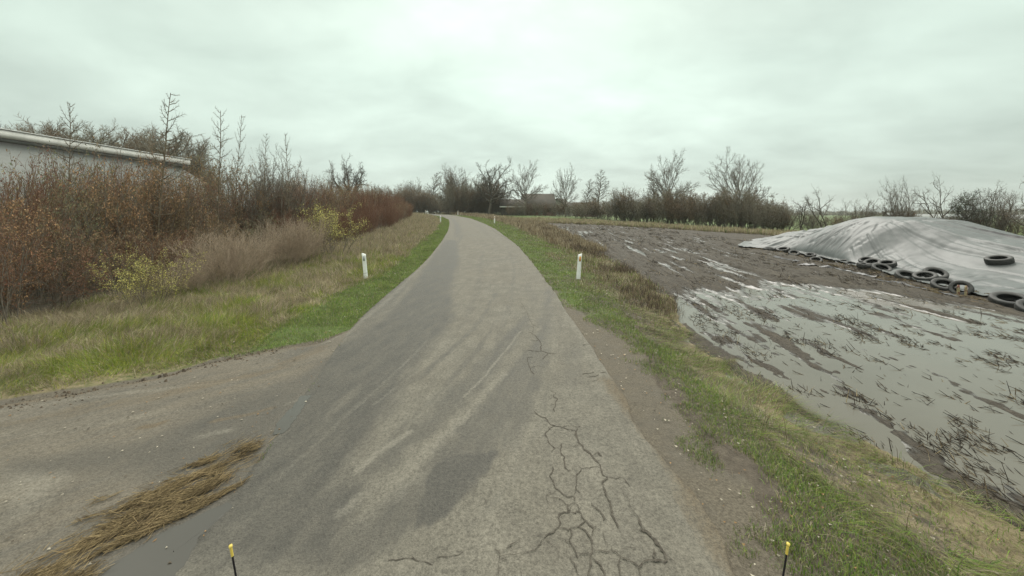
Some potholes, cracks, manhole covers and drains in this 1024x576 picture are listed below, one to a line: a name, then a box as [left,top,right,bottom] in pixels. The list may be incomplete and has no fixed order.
crack [495,412,675,576]
crack [390,551,463,565]
crack [520,301,555,374]
